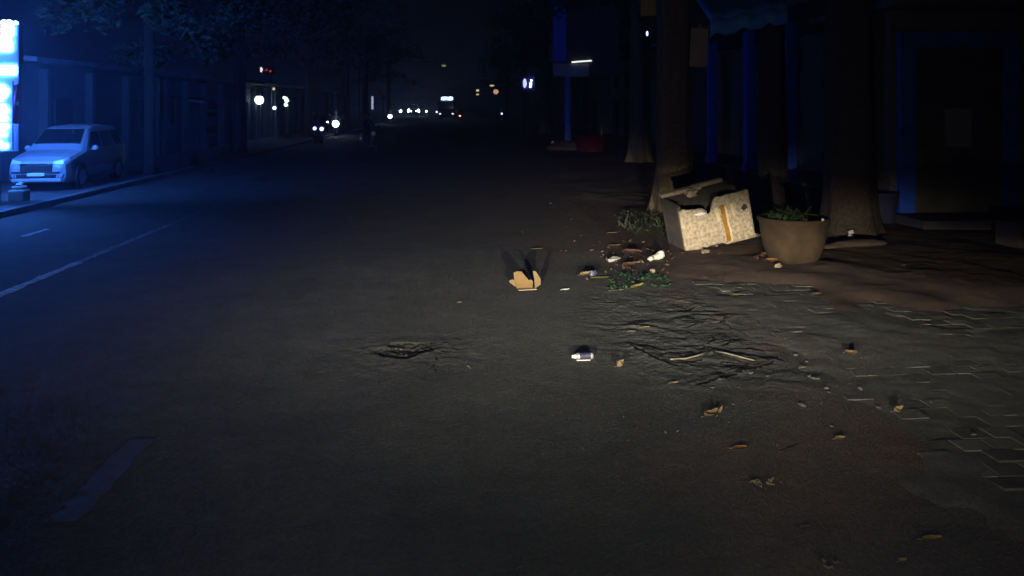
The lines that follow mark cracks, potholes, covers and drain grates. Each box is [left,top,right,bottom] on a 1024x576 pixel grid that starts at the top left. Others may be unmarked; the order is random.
pothole [374,341,440,359]
crack [627,306,775,385]
